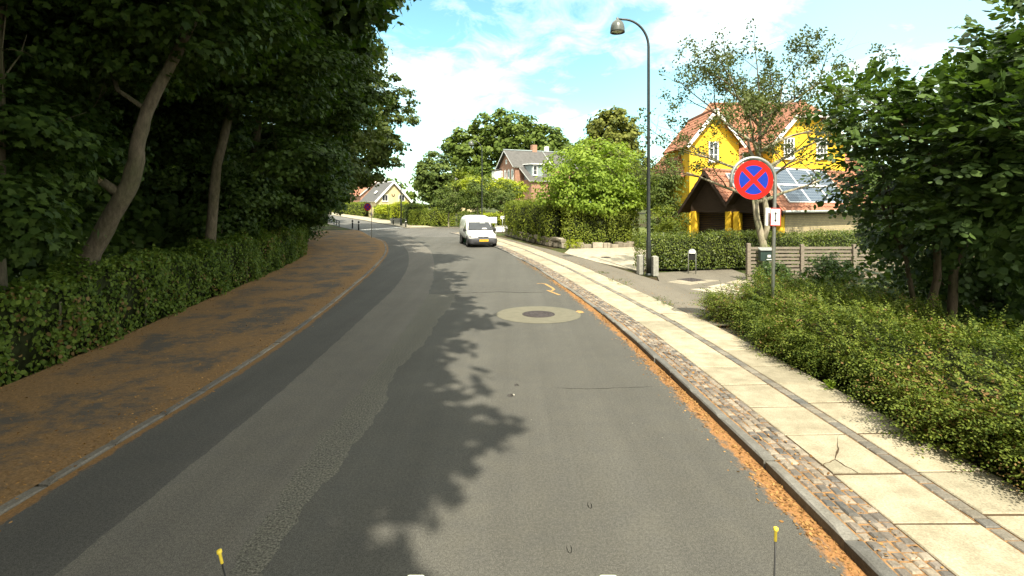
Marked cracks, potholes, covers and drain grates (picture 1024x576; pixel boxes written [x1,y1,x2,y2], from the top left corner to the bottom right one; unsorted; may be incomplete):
crack [820,434,861,474]
manhole cover [497,306,581,323]
